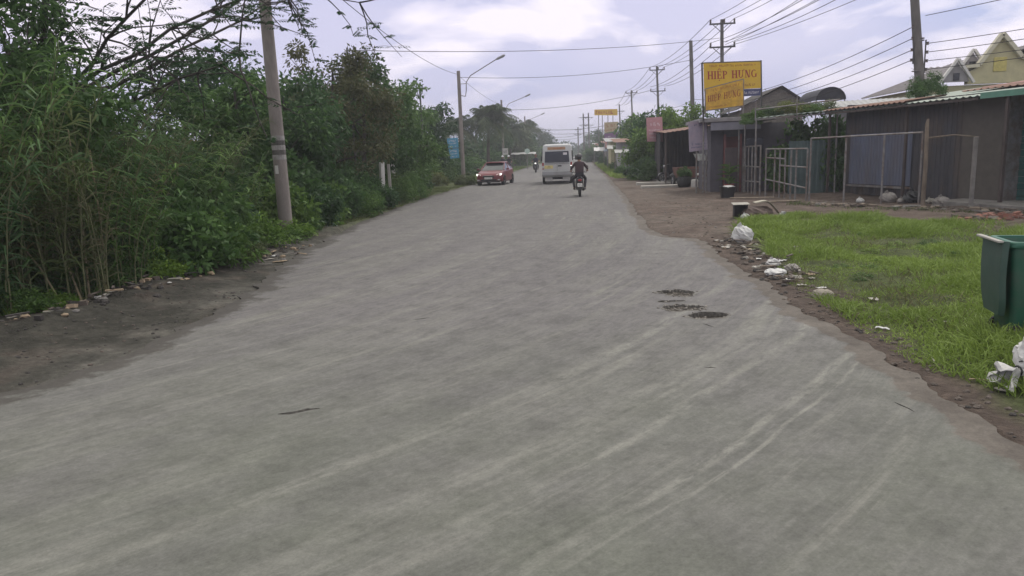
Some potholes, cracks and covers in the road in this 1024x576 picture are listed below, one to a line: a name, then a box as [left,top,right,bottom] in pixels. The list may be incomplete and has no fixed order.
pothole [652,288,698,297]
pothole [683,311,731,320]
pothole [657,303,708,312]
